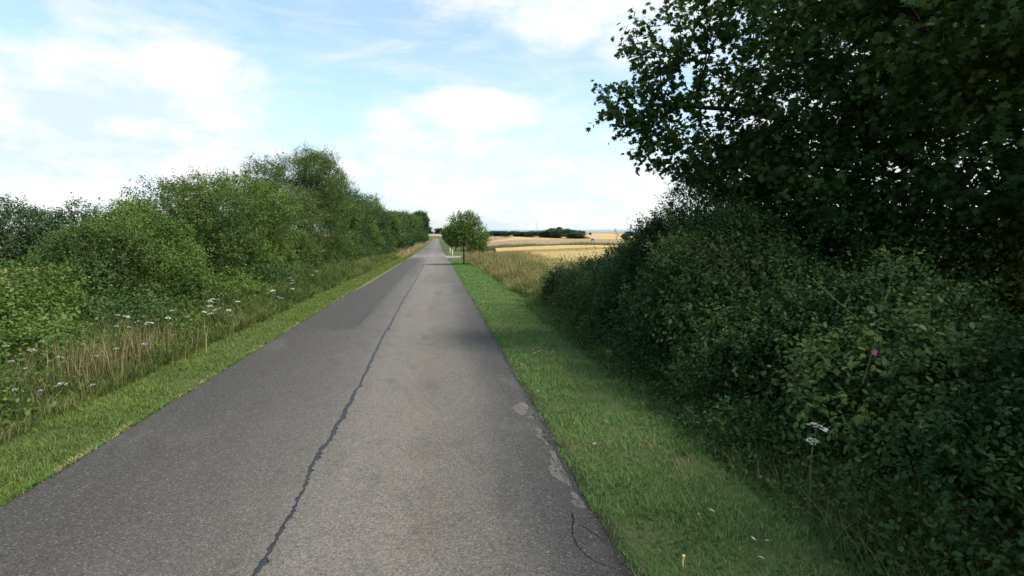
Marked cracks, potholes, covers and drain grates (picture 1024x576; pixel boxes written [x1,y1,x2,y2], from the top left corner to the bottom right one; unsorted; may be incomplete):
pothole [535,426,552,445]
pothole [571,491,587,508]
pothole [512,402,529,415]
pothole [548,448,575,488]
crack [251,263,425,576]
crack [571,512,616,569]
